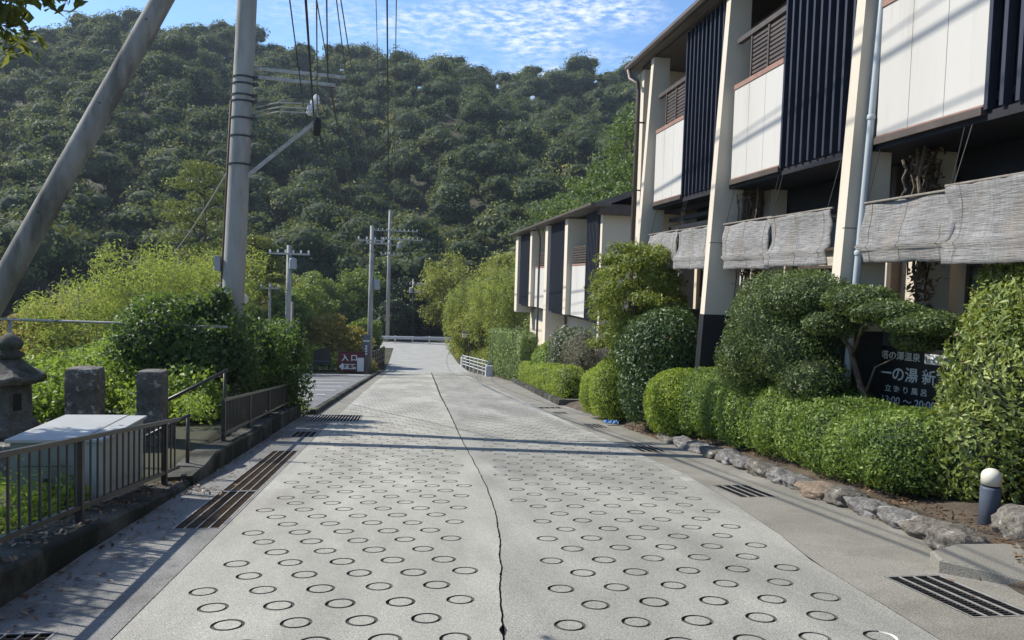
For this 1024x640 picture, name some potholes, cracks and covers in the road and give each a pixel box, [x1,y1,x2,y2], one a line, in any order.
drain grate [713,485,779,497]
drain grate [221,450,299,491]
crack [431,373,507,640]
drain grate [884,575,1024,618]
drain grate [172,491,258,535]
drain grate [0,631,58,640]
